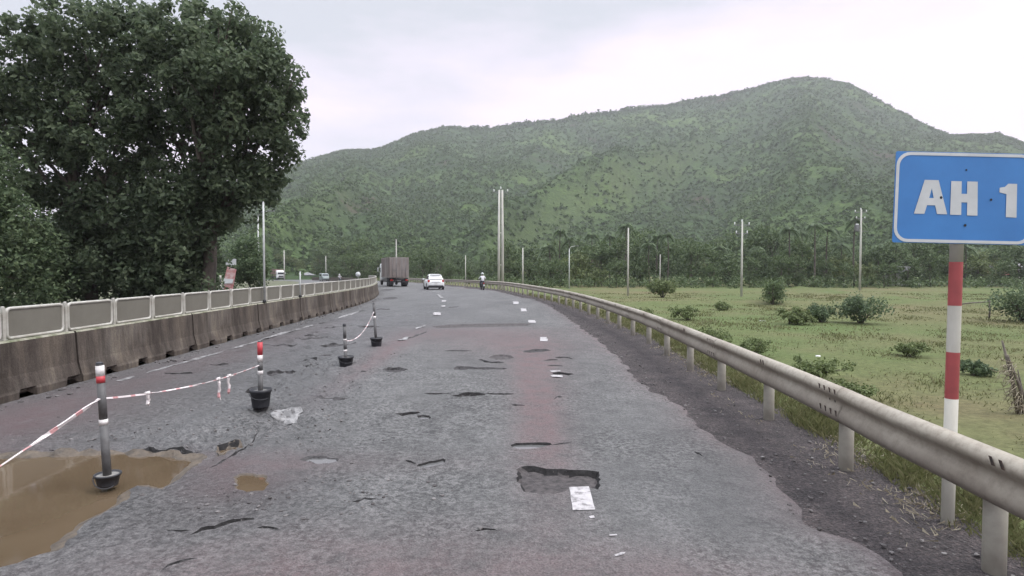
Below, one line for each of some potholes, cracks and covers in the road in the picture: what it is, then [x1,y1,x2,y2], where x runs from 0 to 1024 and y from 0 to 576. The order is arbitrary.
pothole [516,466,601,494]
crack [160,558,197,572]
pothole [233,473,269,492]
crack [164,518,280,535]
pothole [0,448,207,562]
pothole [216,439,244,457]
